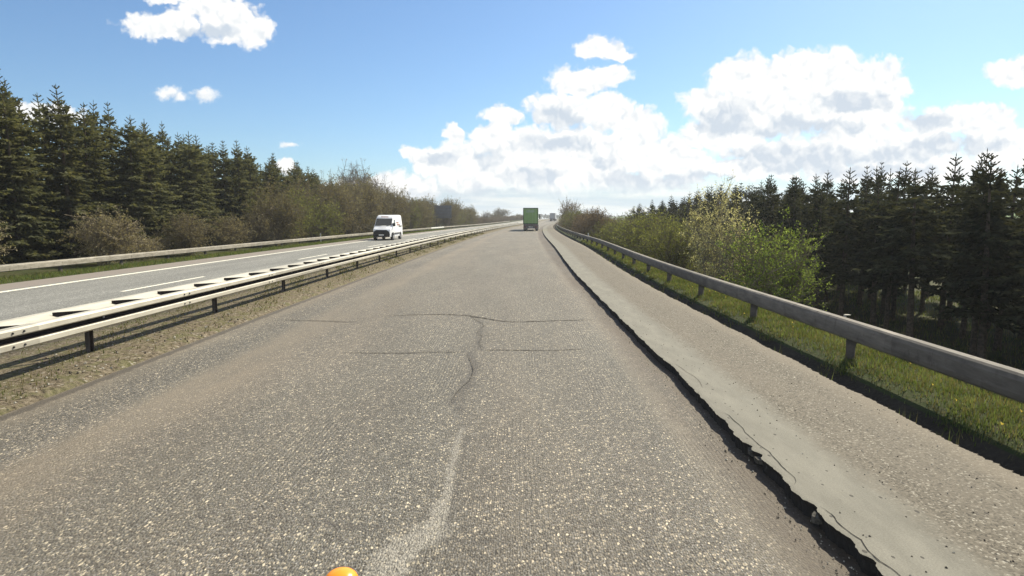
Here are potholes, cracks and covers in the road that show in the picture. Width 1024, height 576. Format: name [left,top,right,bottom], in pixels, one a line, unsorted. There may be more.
crack [825,509,899,575]
crack [345,314,590,403]
